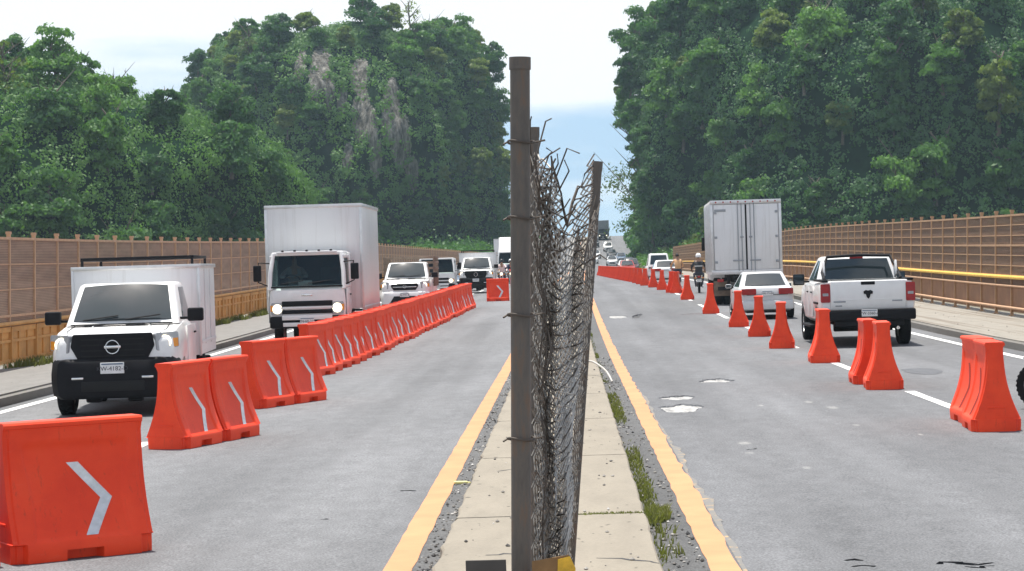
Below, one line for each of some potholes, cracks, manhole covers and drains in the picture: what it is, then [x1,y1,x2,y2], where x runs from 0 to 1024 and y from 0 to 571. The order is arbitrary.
crack [844,558,876,567]
pothole [658,404,704,413]
